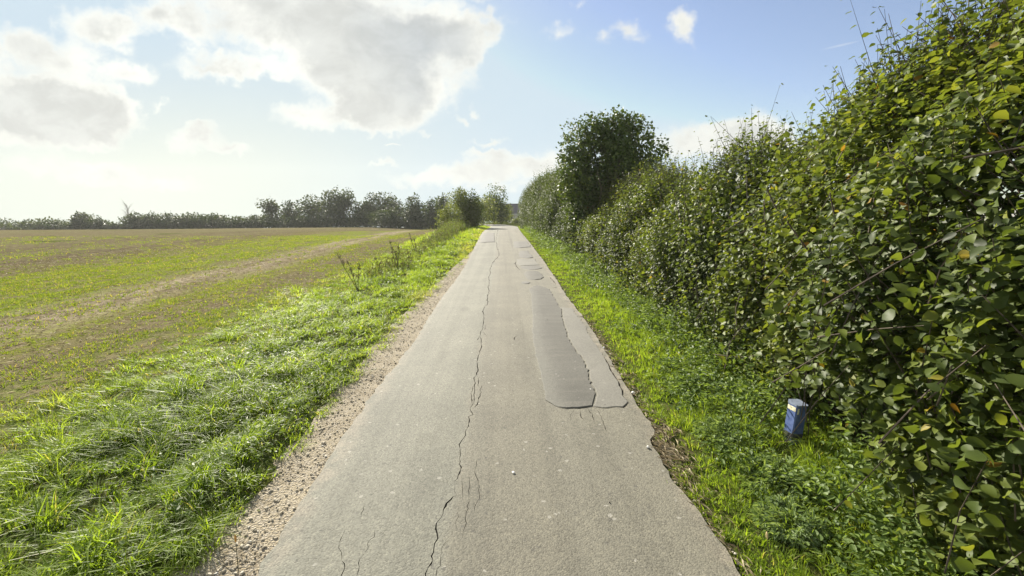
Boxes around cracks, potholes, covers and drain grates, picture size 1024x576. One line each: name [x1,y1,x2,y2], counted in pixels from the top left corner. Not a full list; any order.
crack [425,230,499,576]
crack [339,507,375,576]
crack [544,357,628,431]
